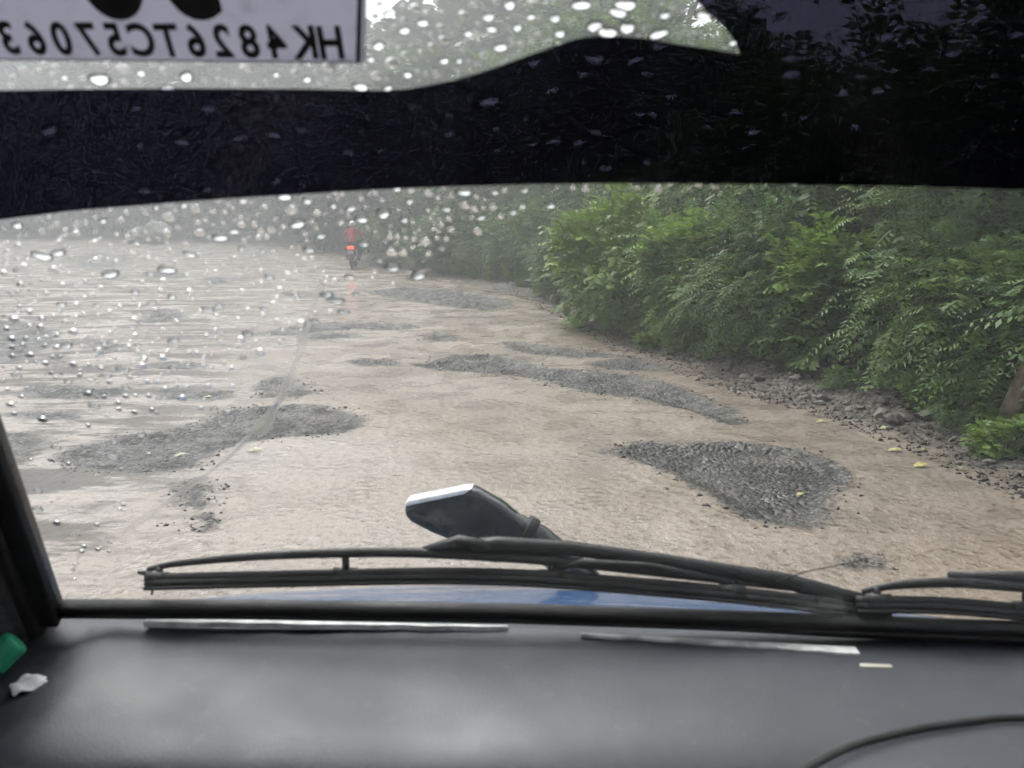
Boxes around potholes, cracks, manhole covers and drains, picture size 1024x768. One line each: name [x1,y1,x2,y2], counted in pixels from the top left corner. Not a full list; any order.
pothole [571,434,889,547]
pothole [0,405,127,429]
pothole [387,329,493,347]
pothole [212,318,456,341]
pothole [22,399,401,489]
pothole [134,469,262,551]
pothole [225,370,360,404]
pothole [473,337,646,362]
pothole [402,349,797,435]
pothole [310,354,415,373]
